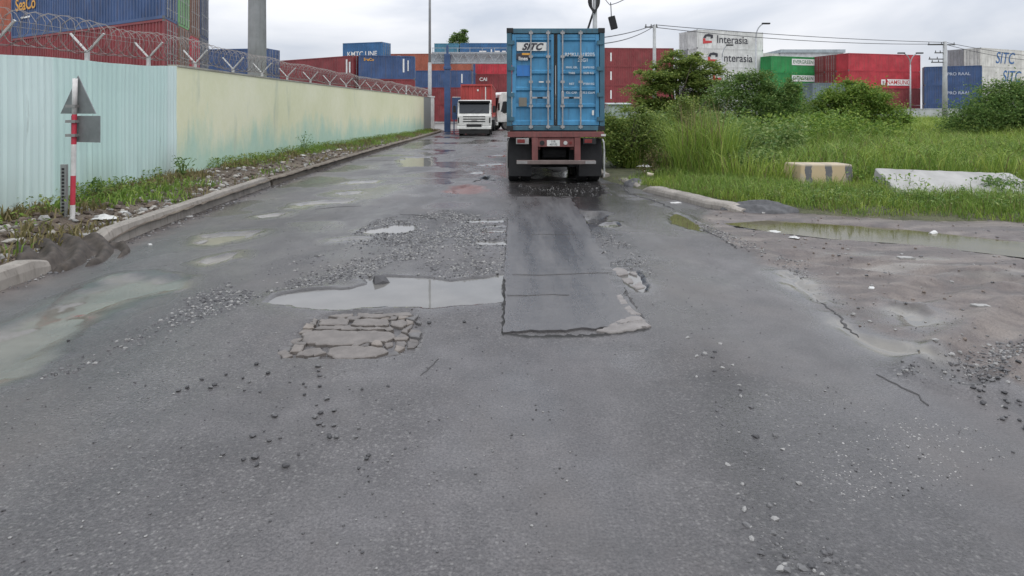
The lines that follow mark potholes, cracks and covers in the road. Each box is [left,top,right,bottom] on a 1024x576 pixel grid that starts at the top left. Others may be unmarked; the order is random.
pothole [354,223,419,235]
pothole [188,230,267,246]
pothole [583,211,609,224]
pothole [193,251,244,267]
crack [816,299,859,337]
pothole [510,182,613,198]
pothole [665,212,710,232]
crack [876,374,928,405]
pothole [397,157,437,167]
pothole [260,271,506,311]
